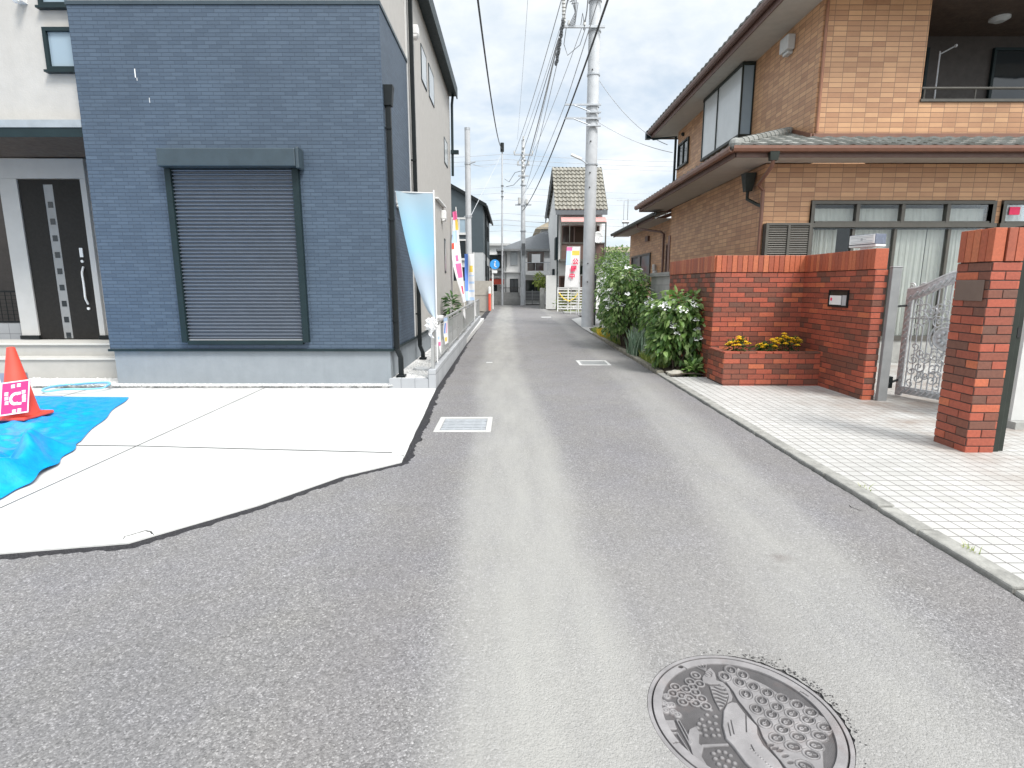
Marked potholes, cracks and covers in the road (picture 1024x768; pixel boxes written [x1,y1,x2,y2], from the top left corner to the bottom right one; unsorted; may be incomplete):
manhole cover [647,655,855,768]
drain grate [433,417,493,432]
